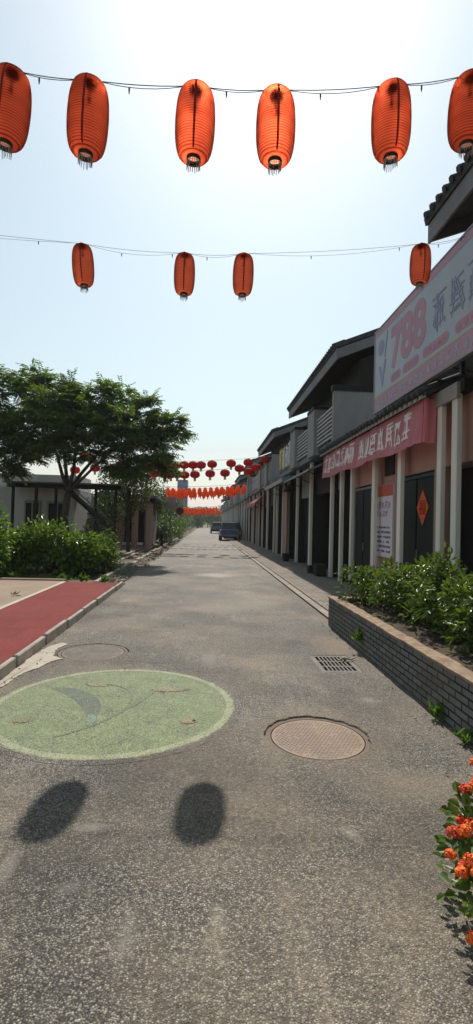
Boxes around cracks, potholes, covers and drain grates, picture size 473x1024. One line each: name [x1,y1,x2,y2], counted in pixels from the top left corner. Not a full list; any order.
manhole cover [263,715,372,761]
manhole cover [56,643,130,661]
drain grate [309,655,363,672]
